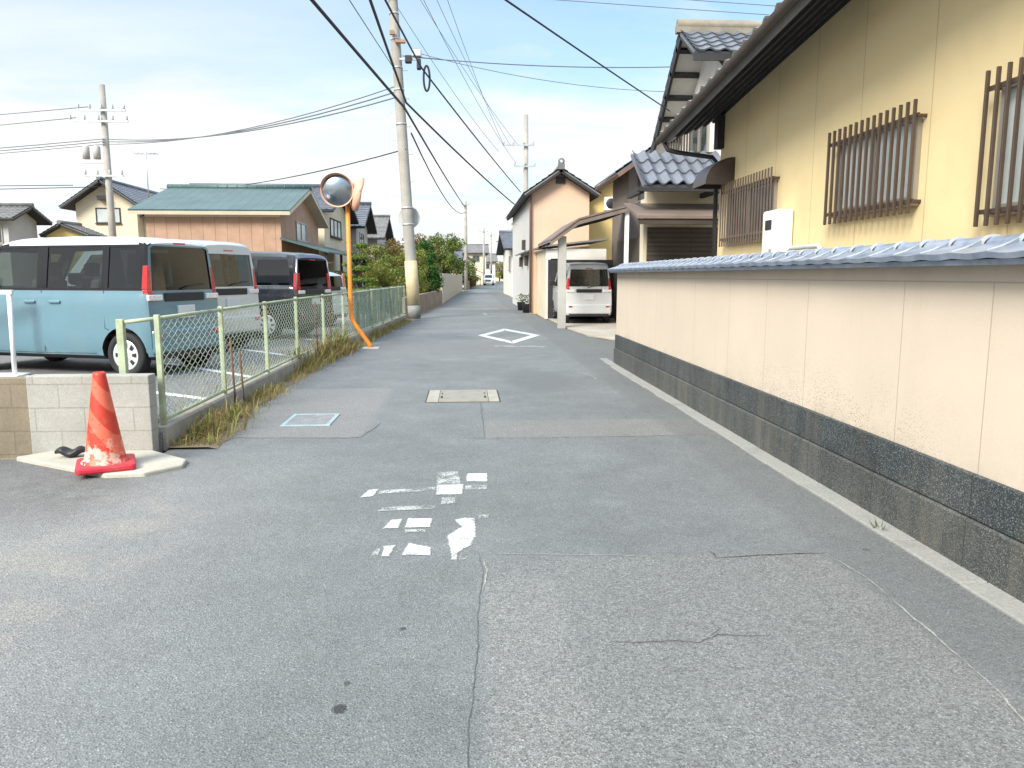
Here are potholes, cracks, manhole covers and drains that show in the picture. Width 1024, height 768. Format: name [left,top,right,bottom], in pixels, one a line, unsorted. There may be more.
crack [618,621,766,643]
manhole cover [280,413,340,426]
manhole cover [425,390,501,403]
crack [826,553,1024,721]
